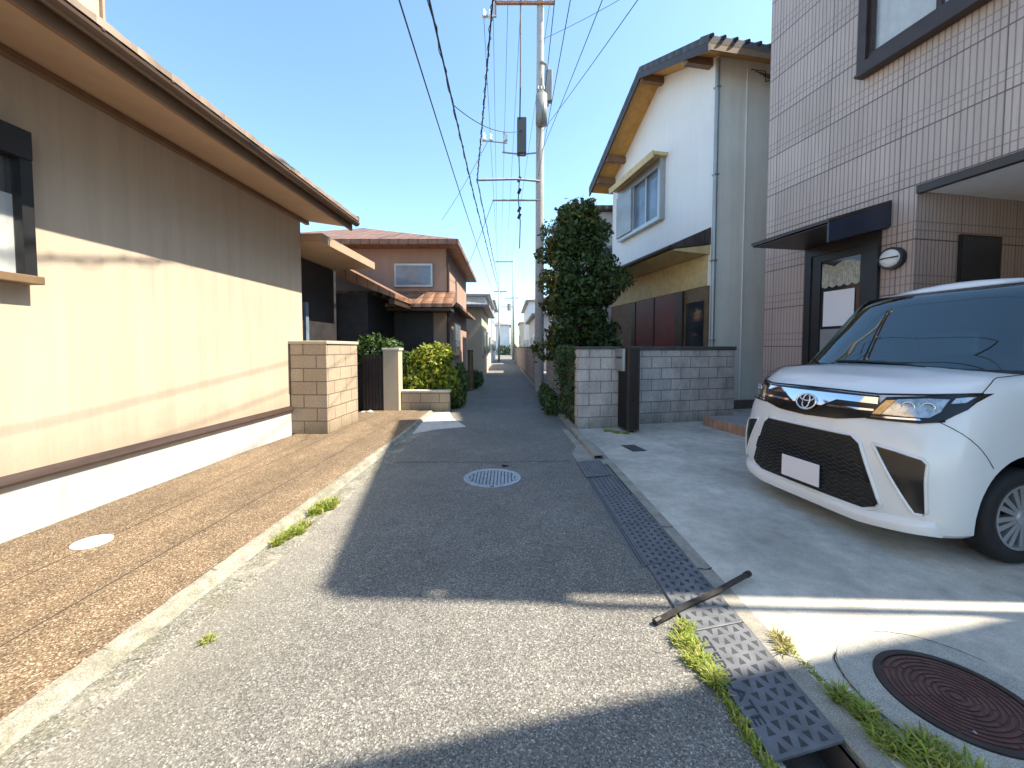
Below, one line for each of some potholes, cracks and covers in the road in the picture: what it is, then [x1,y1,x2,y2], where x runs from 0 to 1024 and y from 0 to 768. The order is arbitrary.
manhole cover [464,469,521,488]
manhole cover [836,632,1024,768]
utility cover [69,534,114,550]
